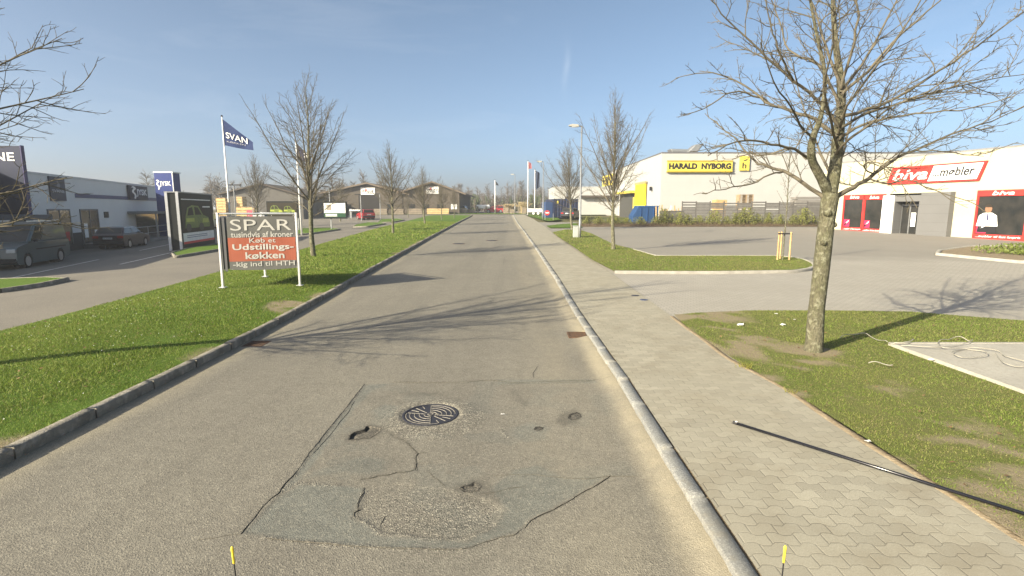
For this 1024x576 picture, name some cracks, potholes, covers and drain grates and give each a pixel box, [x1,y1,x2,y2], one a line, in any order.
crack [198,386,637,550]
pothole [348,425,382,440]
manhole cover [402,404,459,426]
pothole [460,482,481,492]
